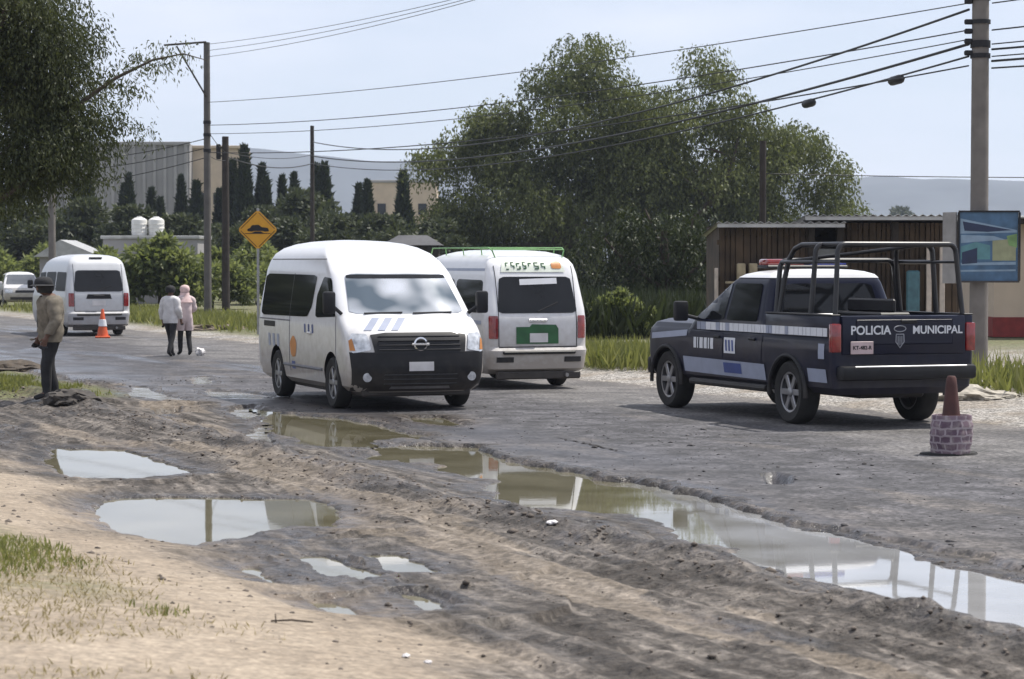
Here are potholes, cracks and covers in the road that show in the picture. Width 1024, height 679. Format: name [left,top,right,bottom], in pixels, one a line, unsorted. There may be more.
pothole [114,385,198,400]
pothole [71,493,359,548]
pothole [355,441,1024,630]
pothole [285,550,394,579]
pothole [233,407,452,449]
pothole [26,445,212,479]
